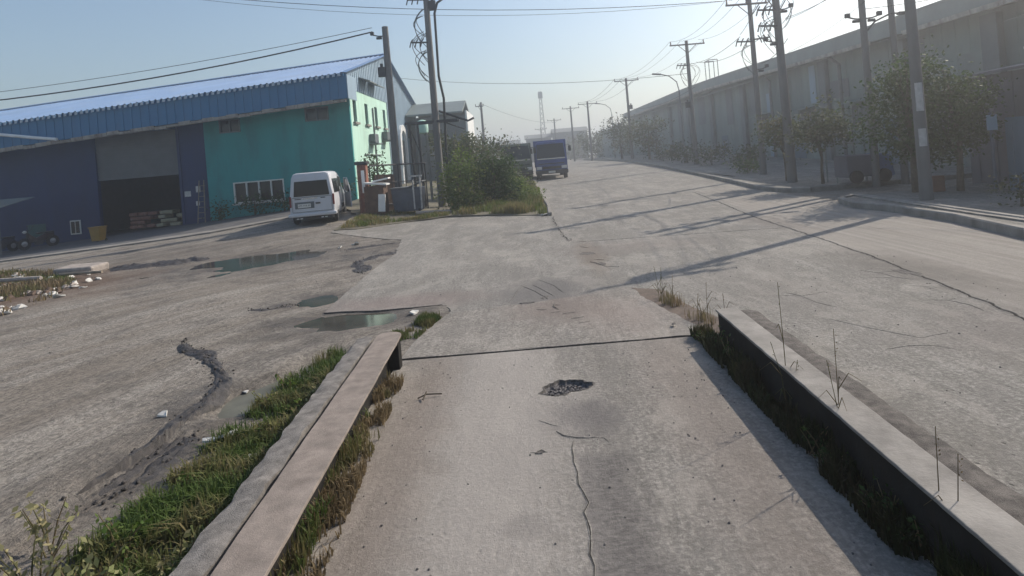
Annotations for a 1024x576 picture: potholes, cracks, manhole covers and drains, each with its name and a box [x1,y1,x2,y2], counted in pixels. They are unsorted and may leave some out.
crack [861,270,982,310]
crack [551,216,572,242]
crack [541,421,605,576]
pothole [538,379,595,396]
